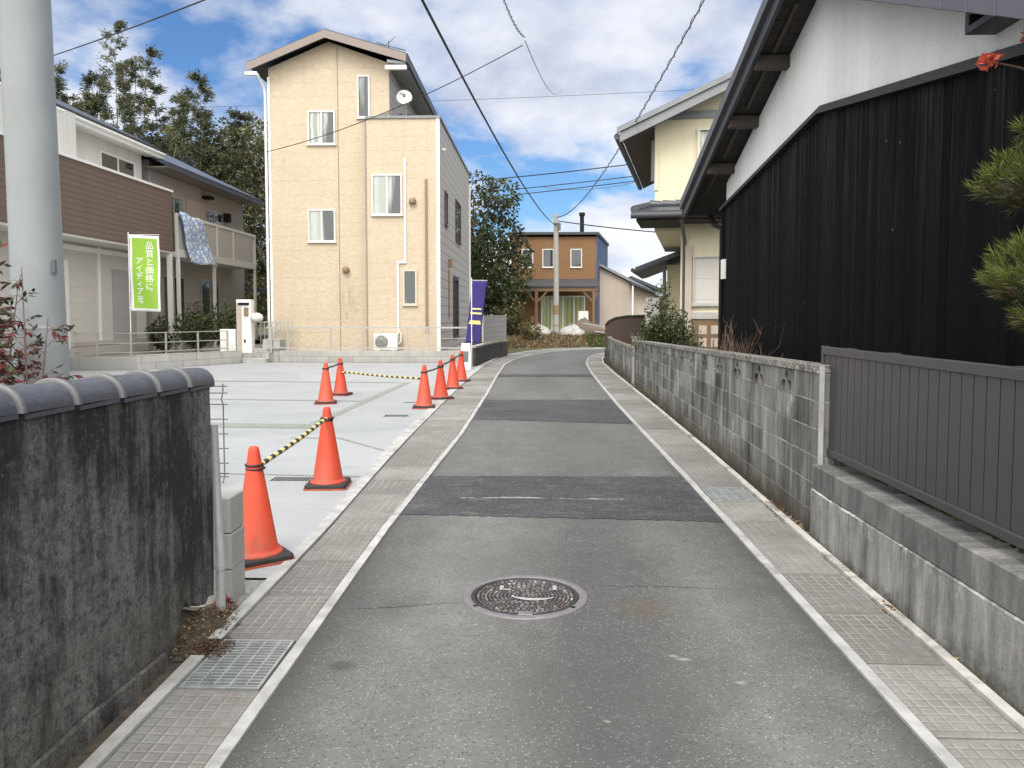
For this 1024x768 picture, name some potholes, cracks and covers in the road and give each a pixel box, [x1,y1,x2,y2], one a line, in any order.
manhole cover [462,575,588,620]
drain grate [178,639,295,692]
drain grate [700,487,758,501]
